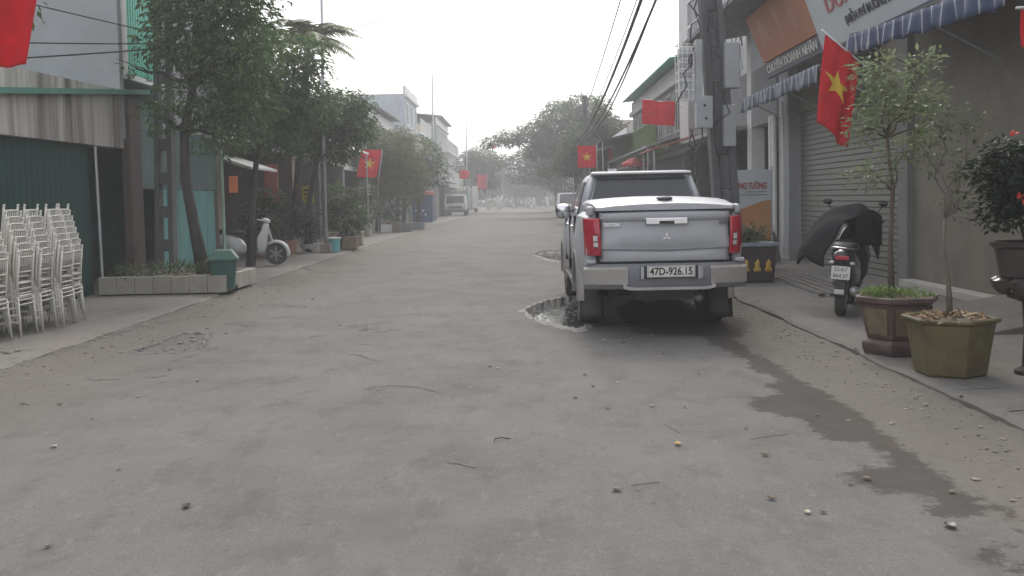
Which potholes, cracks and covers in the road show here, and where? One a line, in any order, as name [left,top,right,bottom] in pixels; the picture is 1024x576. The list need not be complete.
pothole [519,295,606,332]
pothole [532,249,561,263]
crack [310,322,399,362]
pothole [127,330,210,354]
